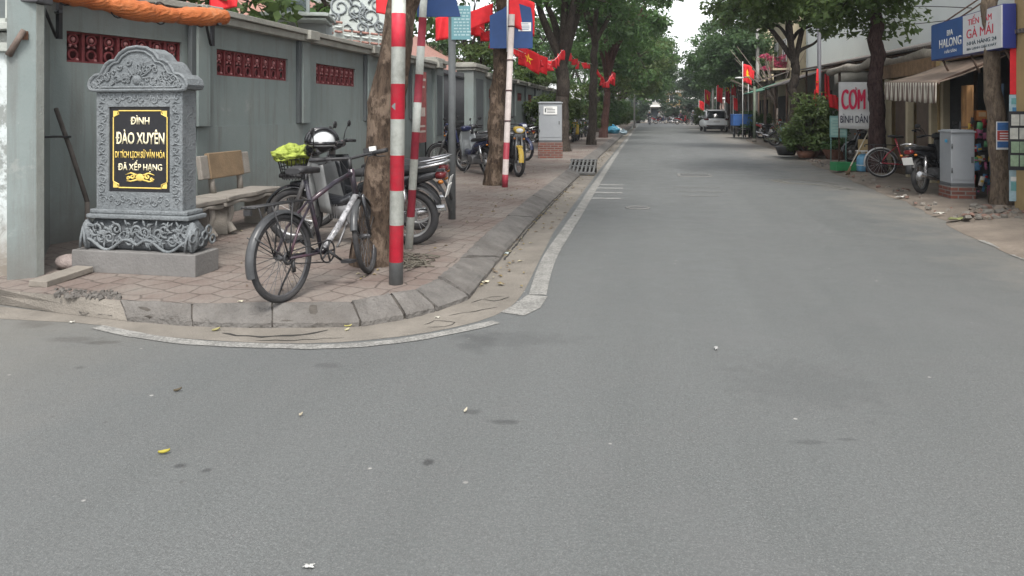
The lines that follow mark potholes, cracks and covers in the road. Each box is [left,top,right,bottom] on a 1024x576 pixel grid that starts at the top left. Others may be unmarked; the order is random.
crack [225,330,344,341]
crack [424,296,507,327]
drain grate [569,159,597,176]
